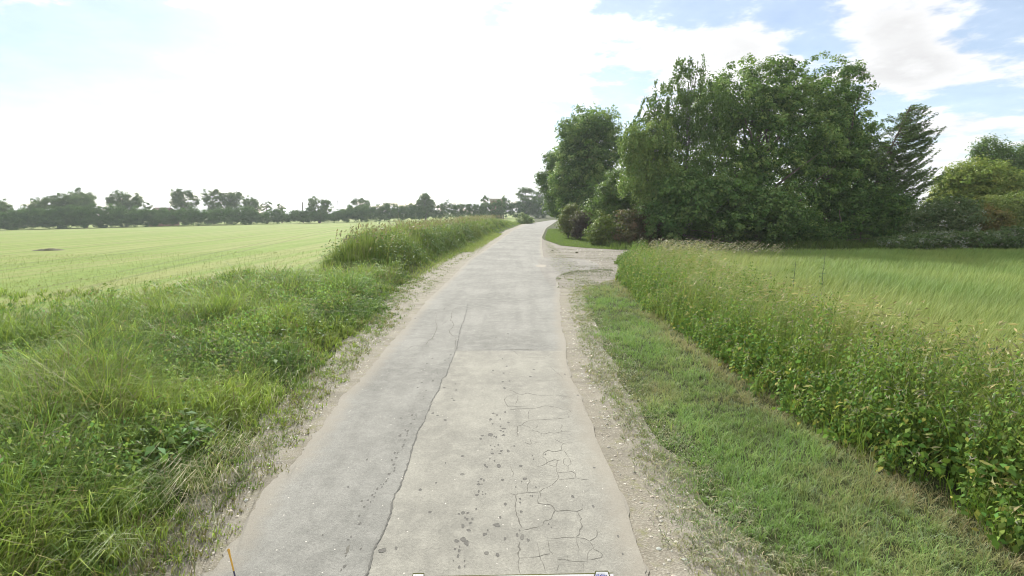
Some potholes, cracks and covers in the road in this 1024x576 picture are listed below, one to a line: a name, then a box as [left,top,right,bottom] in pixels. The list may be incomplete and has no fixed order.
crack [504,390,603,573]
